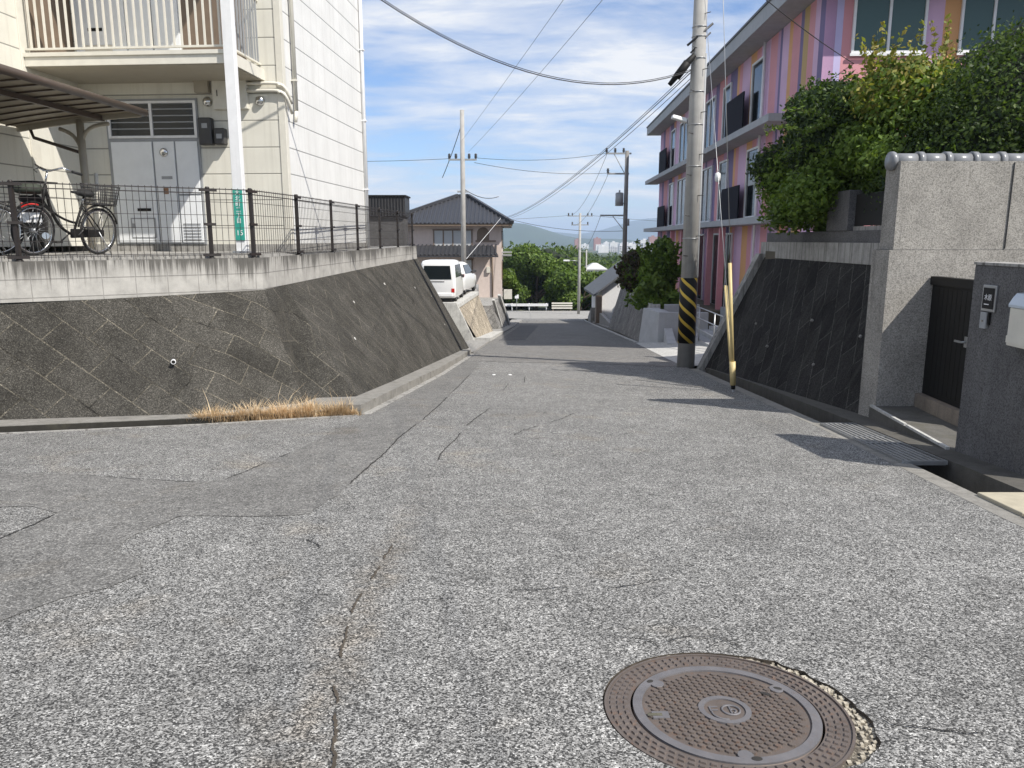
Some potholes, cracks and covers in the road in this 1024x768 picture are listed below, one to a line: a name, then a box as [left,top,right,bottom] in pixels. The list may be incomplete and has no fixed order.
crack [881,716,983,733]
manhole cover [604,654,856,768]
drain grate [820,423,948,465]
crack [331,545,393,768]
